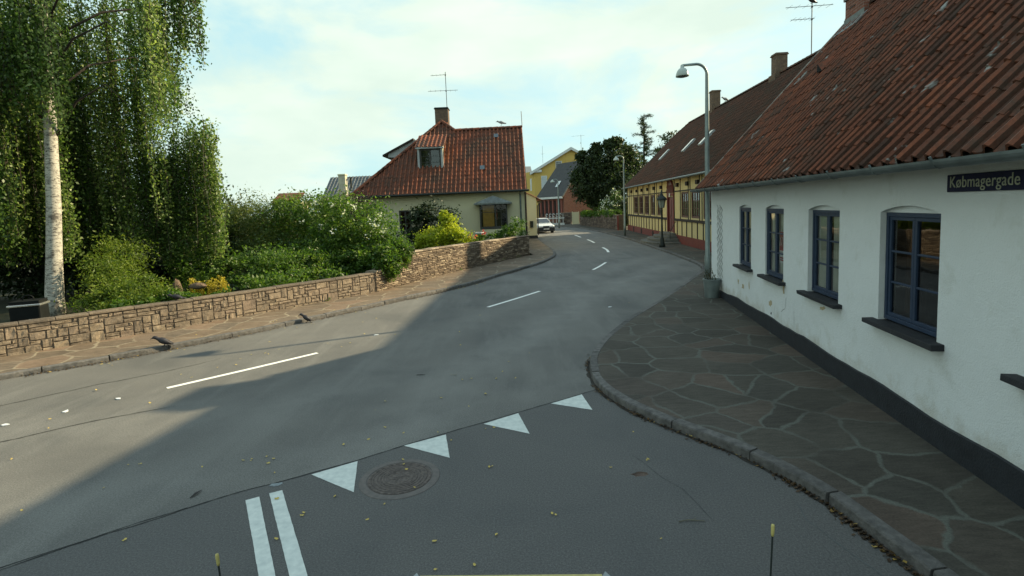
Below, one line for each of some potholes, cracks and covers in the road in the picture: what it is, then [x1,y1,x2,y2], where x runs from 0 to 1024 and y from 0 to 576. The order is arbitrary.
manhole cover [359,459,440,500]
